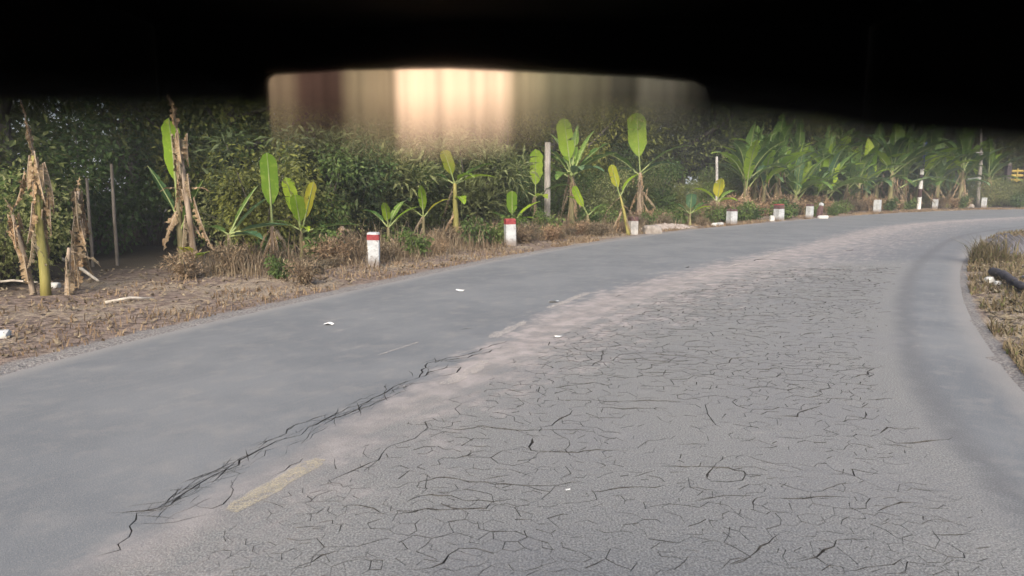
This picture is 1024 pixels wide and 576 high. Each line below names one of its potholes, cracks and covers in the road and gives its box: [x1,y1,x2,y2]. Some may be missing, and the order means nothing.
crack [149,265,1015,576]
